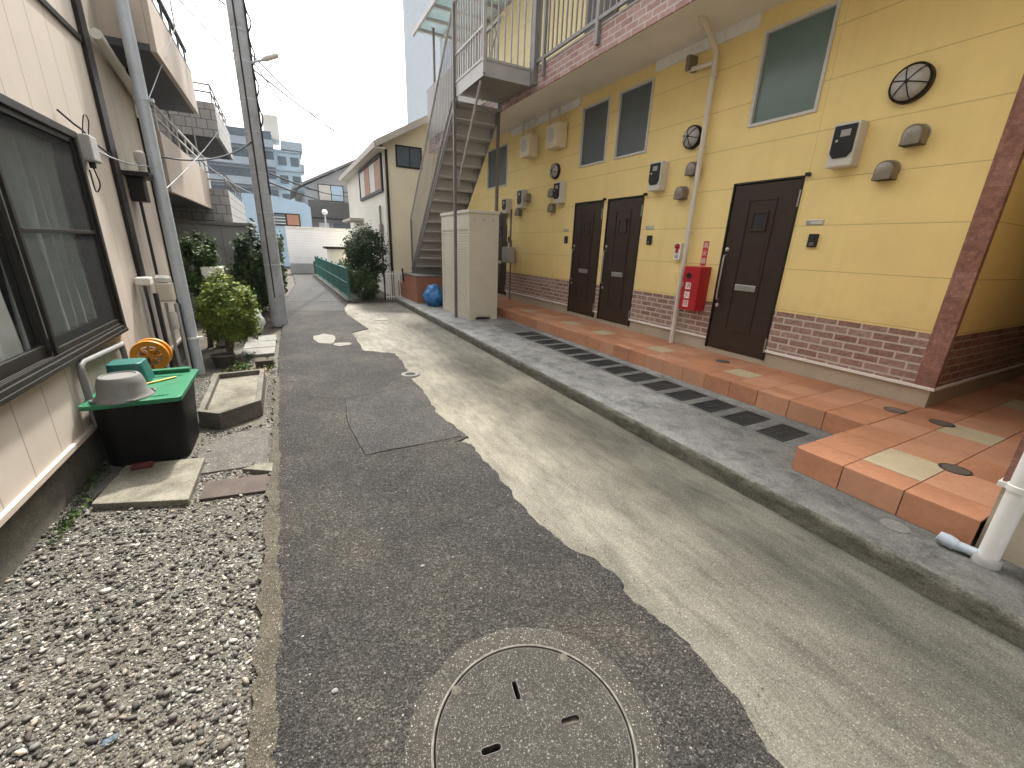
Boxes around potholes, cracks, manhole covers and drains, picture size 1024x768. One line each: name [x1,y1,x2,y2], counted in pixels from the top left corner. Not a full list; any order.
drain grate [665,389,707,401]
utility cover [880,518,911,534]
drain grate [690,399,737,413]
drain grate [641,380,682,391]
drain grate [720,410,770,426]
manhole cover [404,627,665,768]
drain grate [756,423,810,442]
drain grate [603,366,639,374]
